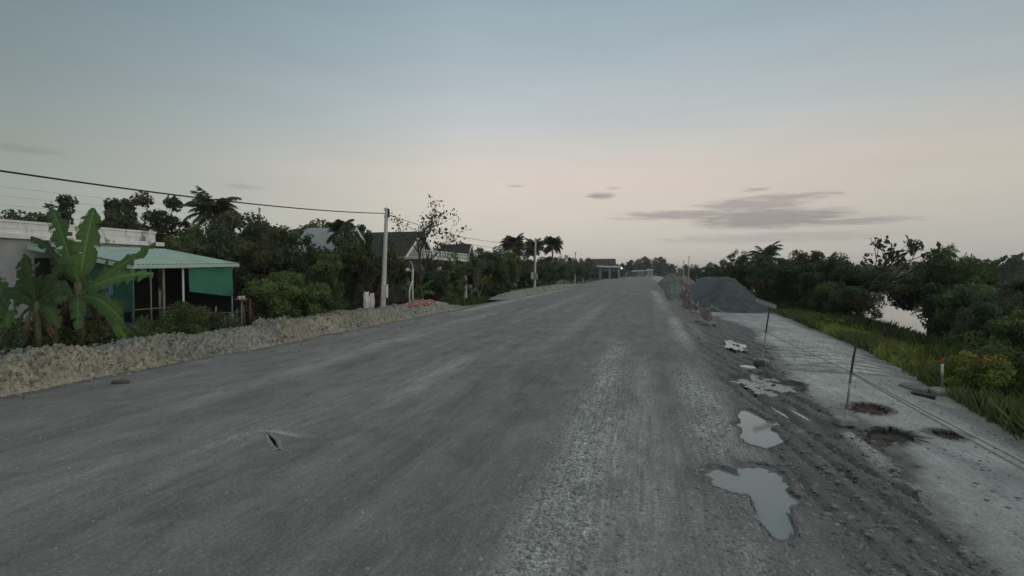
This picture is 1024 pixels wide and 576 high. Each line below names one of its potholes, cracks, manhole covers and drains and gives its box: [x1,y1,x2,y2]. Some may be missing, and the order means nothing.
pothole [839,401,899,417]
pothole [918,427,974,442]
pothole [694,460,807,547]
pothole [729,407,786,451]
pothole [725,372,809,401]
pothole [850,425,930,449]
